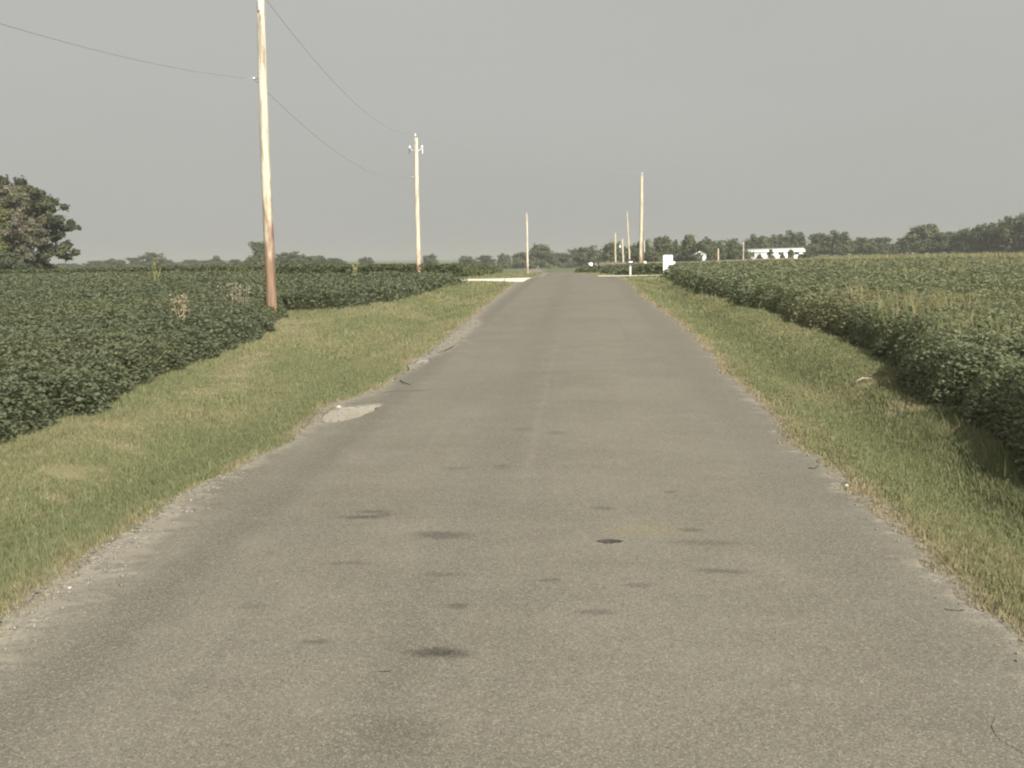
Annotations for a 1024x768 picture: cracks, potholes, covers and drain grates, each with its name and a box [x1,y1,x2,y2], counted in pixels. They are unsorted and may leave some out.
crack [990,718,1023,754]
